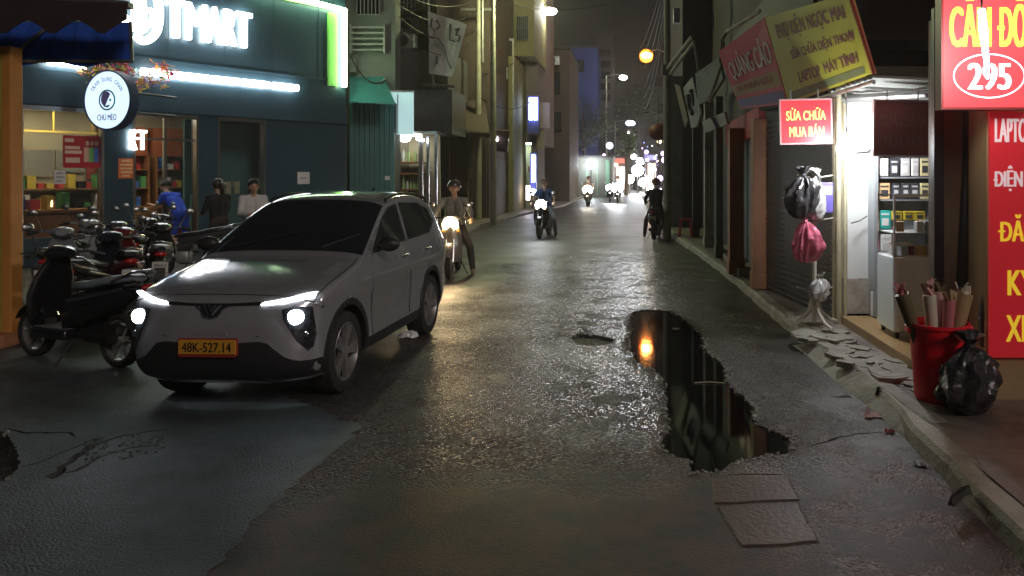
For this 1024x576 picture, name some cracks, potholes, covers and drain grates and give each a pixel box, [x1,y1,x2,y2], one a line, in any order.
crack [5,428,162,479]
pothole [622,309,799,476]
crack [812,432,881,446]
pothole [568,332,616,346]
pothole [0,429,21,481]
